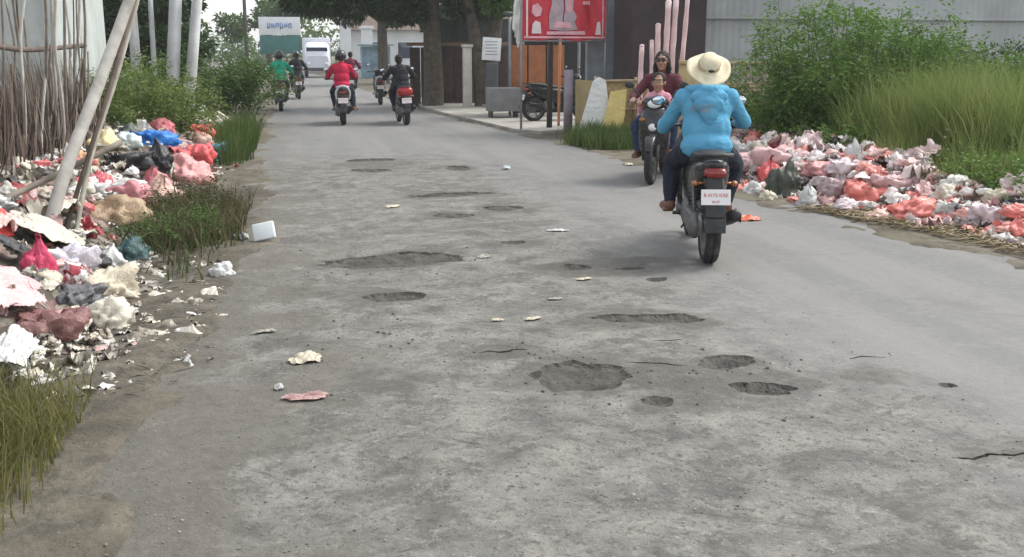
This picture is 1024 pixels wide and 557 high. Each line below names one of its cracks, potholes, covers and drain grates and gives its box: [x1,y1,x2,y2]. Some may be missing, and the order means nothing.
pothole [317,251,466,269]
crack [951,452,1024,460]
pothole [589,313,706,324]
pothole [362,292,426,302]
pothole [528,359,633,392]
pothole [728,382,799,396]
pothole [697,354,756,370]
pothole [640,395,673,407]
